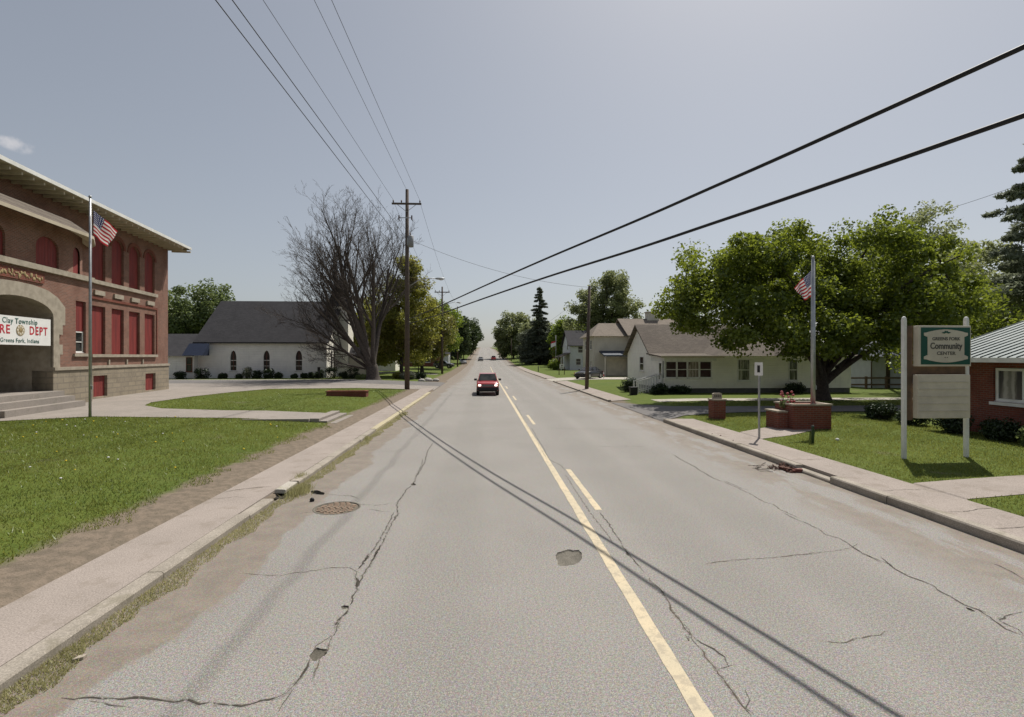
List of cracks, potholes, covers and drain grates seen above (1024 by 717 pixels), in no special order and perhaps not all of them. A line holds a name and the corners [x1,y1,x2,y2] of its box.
pothole [310,648,327,661]
pothole [555,549,582,566]
manhole cover [312,501,361,515]
crack [61,443,433,710]
